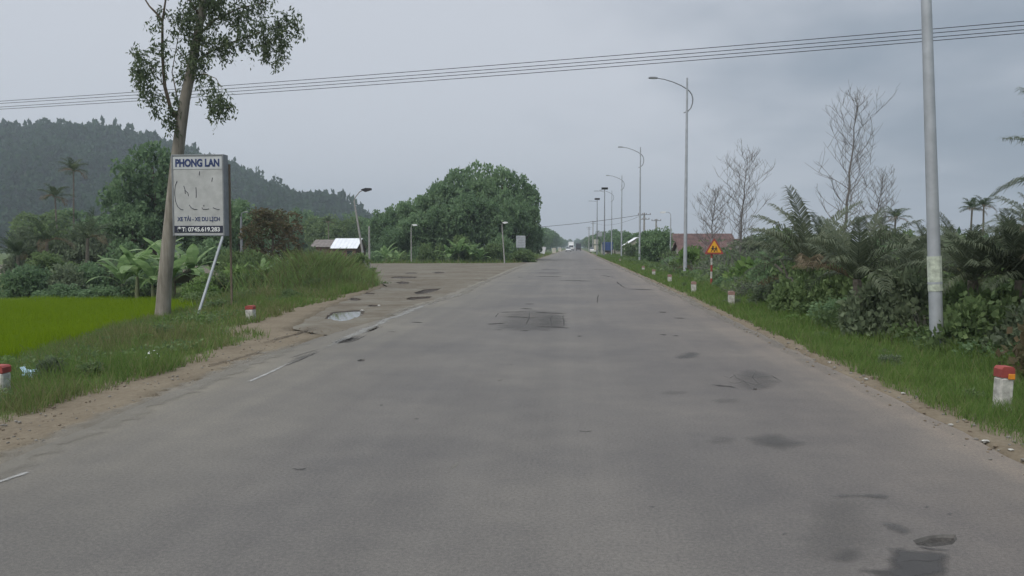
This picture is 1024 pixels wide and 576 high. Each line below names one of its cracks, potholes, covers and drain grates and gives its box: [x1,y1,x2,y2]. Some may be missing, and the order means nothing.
pothole [913,534,957,547]
